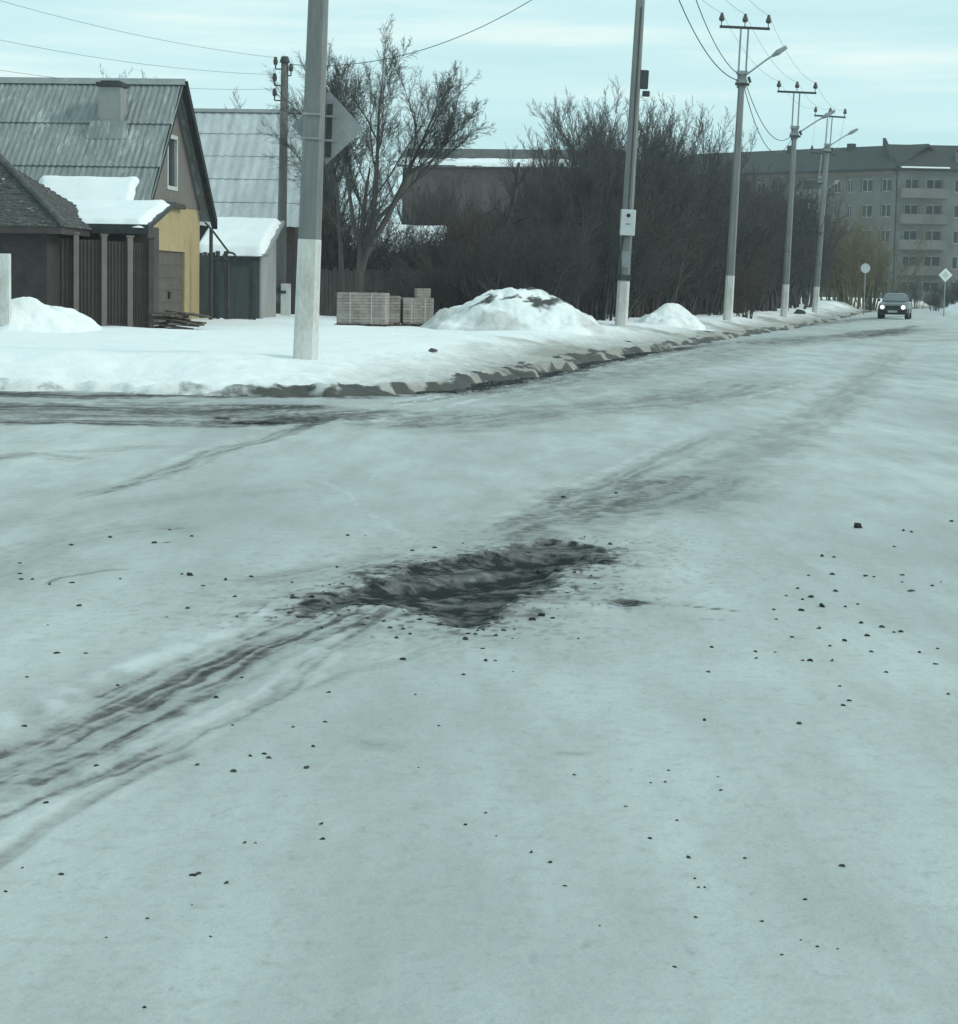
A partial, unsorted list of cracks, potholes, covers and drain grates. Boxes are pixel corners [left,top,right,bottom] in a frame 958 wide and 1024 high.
pothole [609,598,649,607]
pothole [281,538,610,628]
